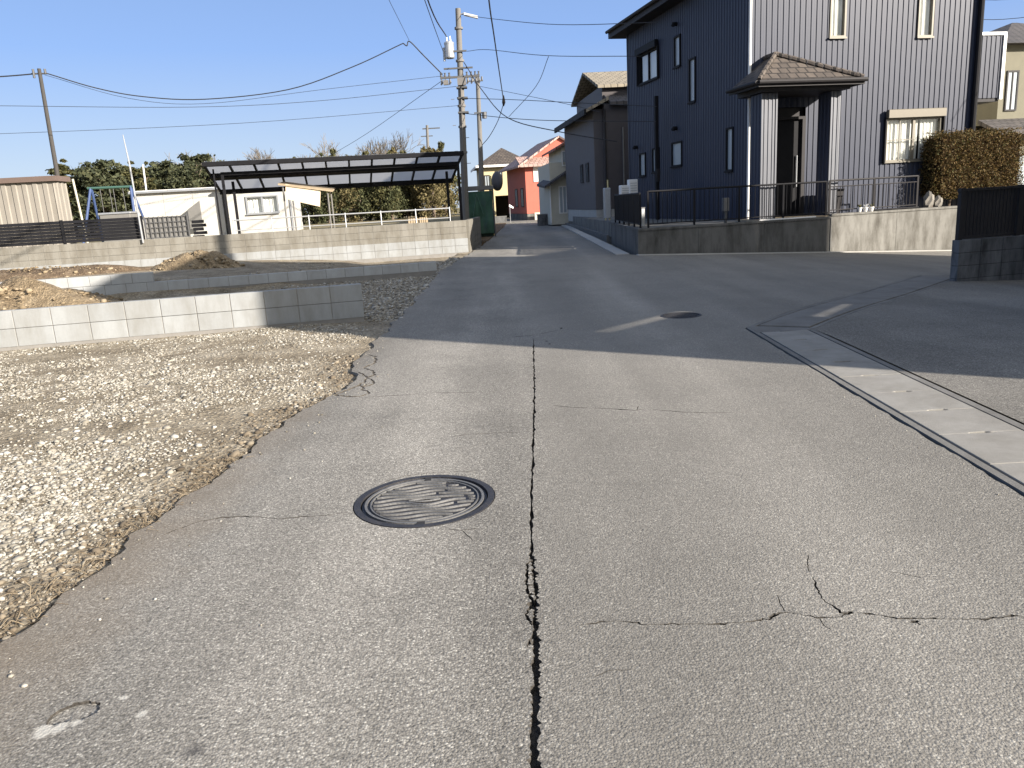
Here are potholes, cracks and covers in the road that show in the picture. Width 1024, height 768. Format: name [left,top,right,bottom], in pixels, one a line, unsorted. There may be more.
crack [577,555,1024,631]
crack [159,512,345,537]
crack [334,355,468,397]
manhole cover [354,475,495,528]
crack [453,328,562,768]
